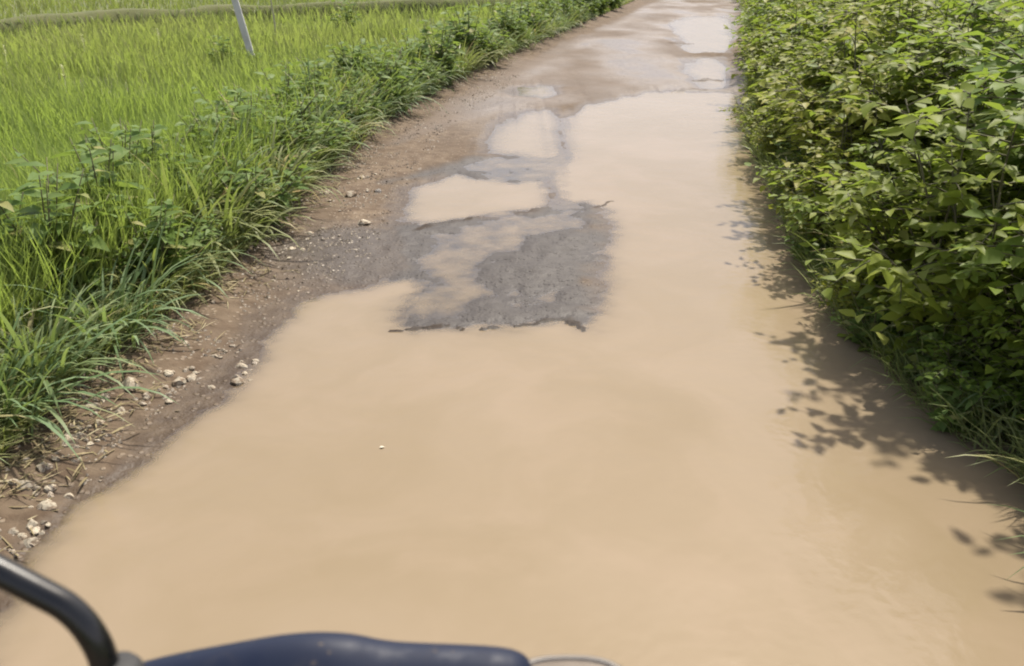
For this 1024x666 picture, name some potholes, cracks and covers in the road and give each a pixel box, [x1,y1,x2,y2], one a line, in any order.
pothole [506,82,564,99]
pothole [385,170,555,229]
pothole [475,106,566,159]
